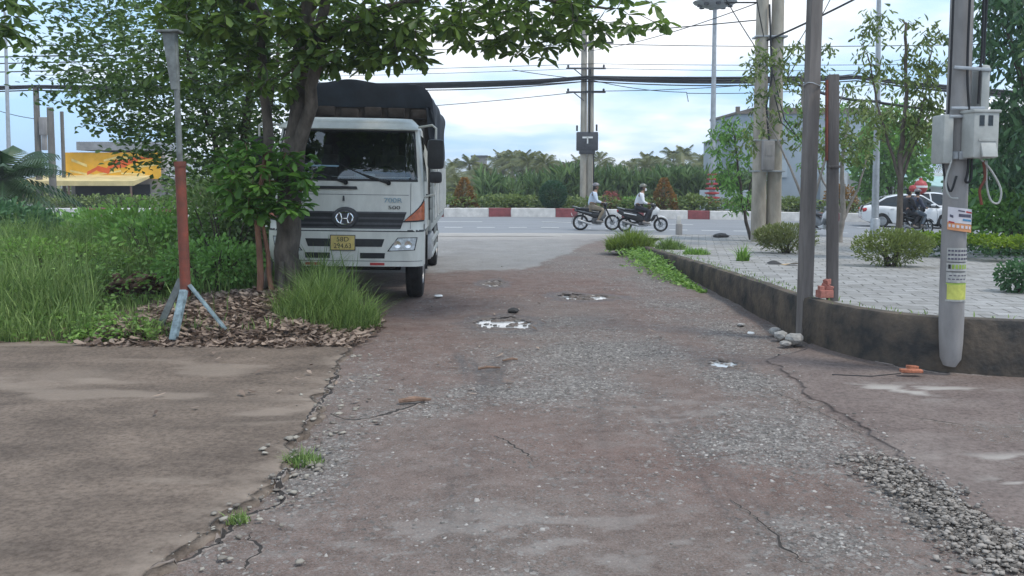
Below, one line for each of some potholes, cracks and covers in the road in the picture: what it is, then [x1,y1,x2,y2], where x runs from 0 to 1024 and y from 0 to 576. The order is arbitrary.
crack [757,384,862,435]
pothole [464,315,538,331]
crack [150,451,297,572]
pothole [478,279,509,288]
crack [305,366,426,424]
crack [494,435,533,461]
crack [730,499,814,566]
pothole [702,359,748,371]
pothole [552,292,626,301]
